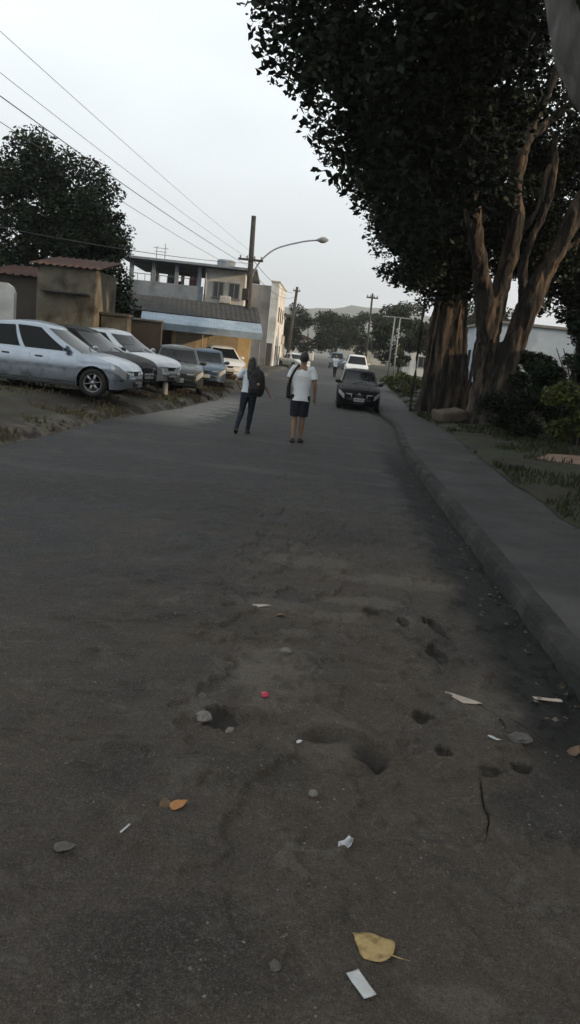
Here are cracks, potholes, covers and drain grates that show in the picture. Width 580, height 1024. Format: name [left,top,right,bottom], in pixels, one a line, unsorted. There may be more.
pothole [427,741,461,761]
pothole [193,701,246,736]
crack [472,777,498,842]
pothole [420,640,452,667]
pothole [286,723,400,782]
pothole [469,761,511,782]
pothole [501,757,542,778]
pothole [406,705,442,728]
